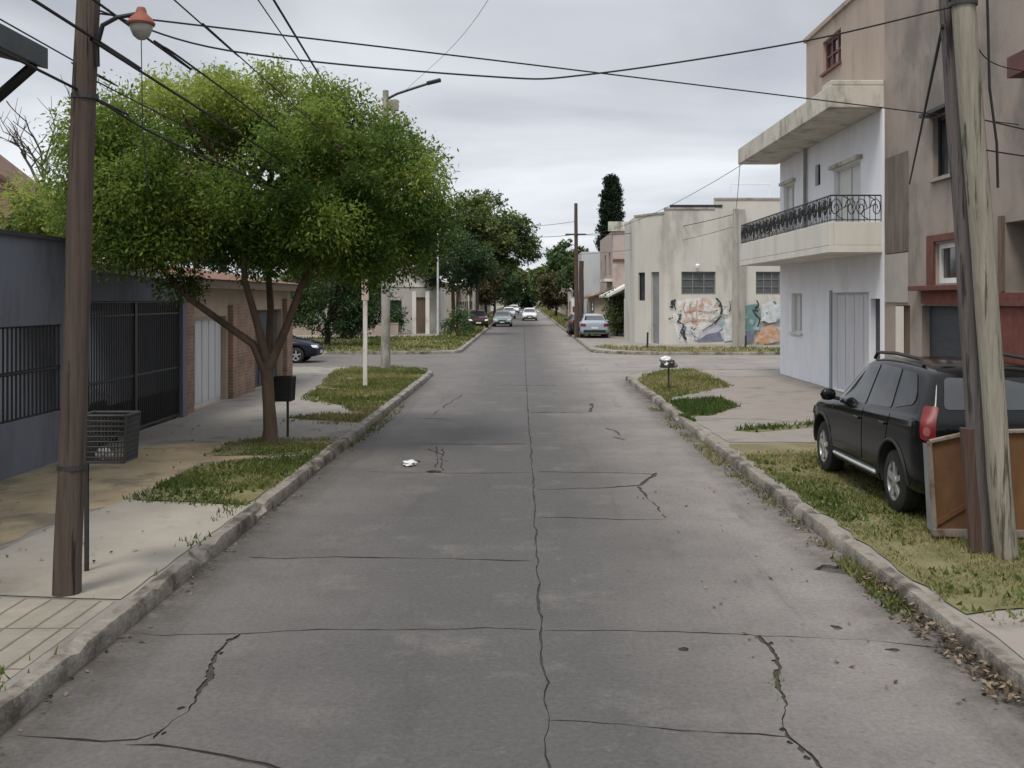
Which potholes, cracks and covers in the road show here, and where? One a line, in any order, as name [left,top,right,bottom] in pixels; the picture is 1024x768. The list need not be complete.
crack [538,404,624,440]
crack [425,446,666,520]
pothole [814,565,855,575]
crack [18,627,944,768]
